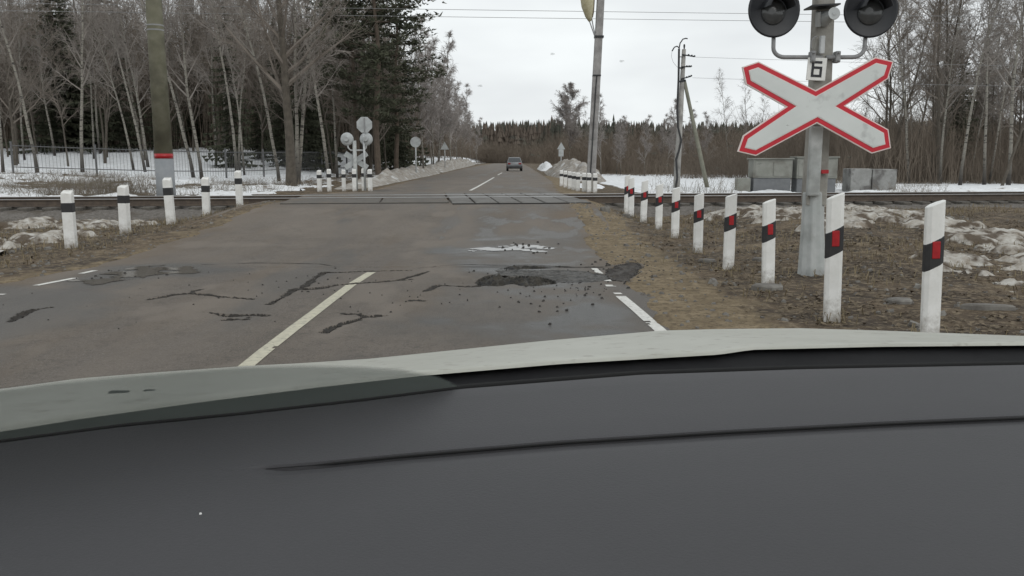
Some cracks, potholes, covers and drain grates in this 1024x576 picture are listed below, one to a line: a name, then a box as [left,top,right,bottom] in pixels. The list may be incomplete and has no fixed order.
crack [8,307,54,322]
pothole [475,274,556,287]
crack [147,270,482,333]
pothole [605,262,642,282]
